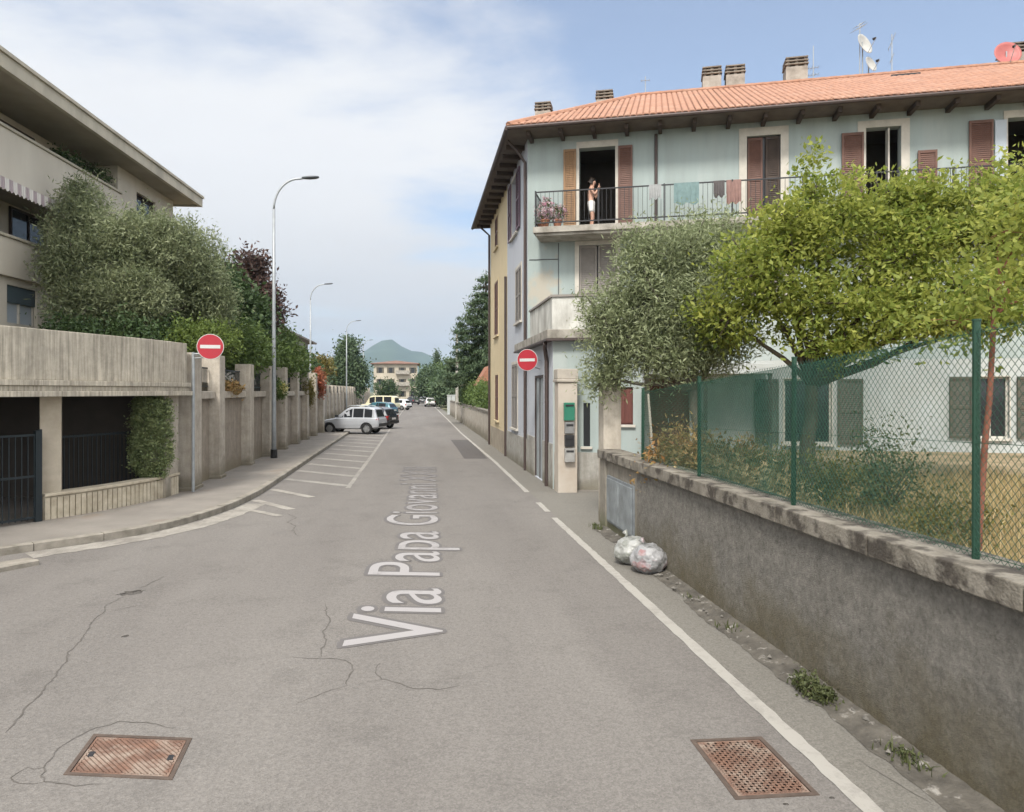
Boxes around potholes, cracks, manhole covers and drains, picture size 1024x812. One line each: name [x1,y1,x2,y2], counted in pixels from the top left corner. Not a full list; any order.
manhole cover [63,734,192,780]
crack [5,576,179,786]
crack [296,605,459,703]
